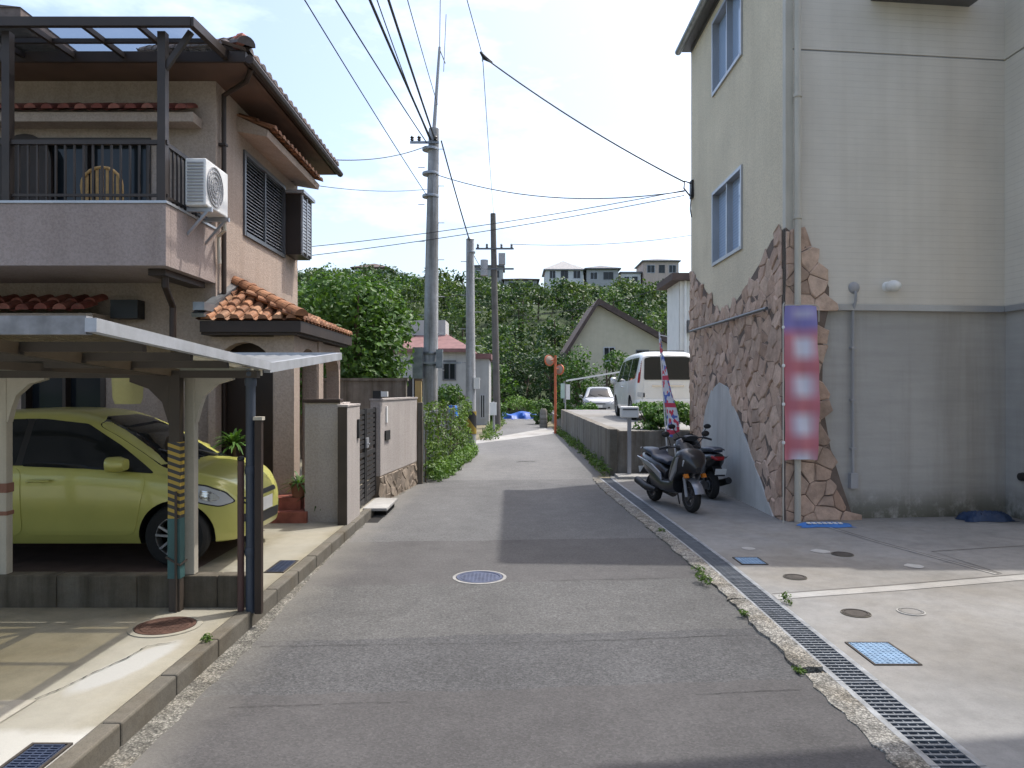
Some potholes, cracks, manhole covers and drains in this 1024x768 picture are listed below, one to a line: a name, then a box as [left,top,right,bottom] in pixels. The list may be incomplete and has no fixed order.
drain grate [643,512,678,526]
drain grate [737,589,810,627]
drain grate [629,501,660,513]
drain grate [618,492,644,502]
drain grate [682,541,730,563]
manhole cover [127,615,202,638]
drain grate [660,525,700,542]
drain grate [706,562,763,590]
drain grate [264,560,299,573]
manhole cover [896,607,926,616]
manhole cover [453,570,506,585]
